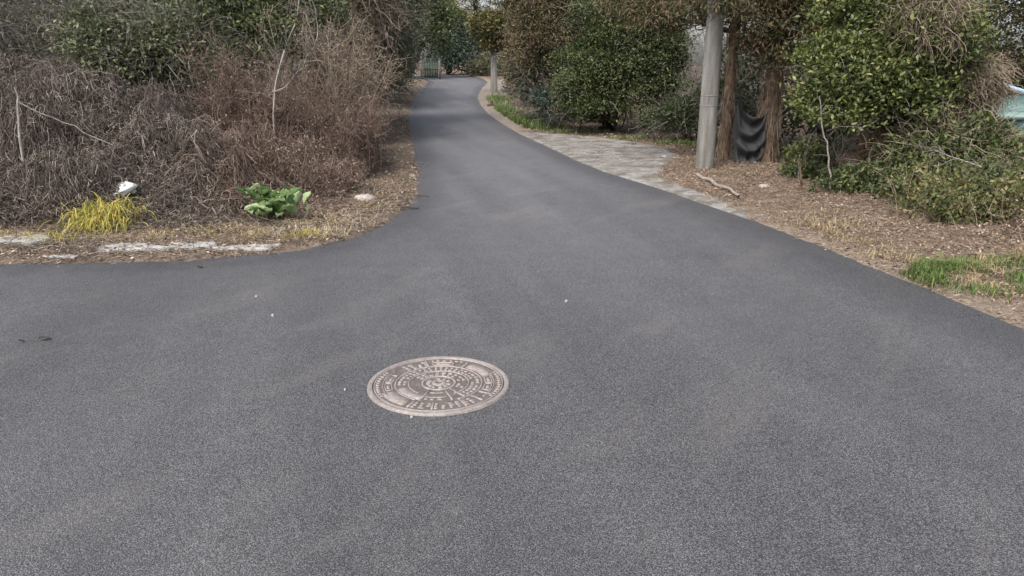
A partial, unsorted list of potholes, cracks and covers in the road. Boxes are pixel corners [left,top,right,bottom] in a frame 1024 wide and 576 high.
manhole cover [367,356,510,417]
